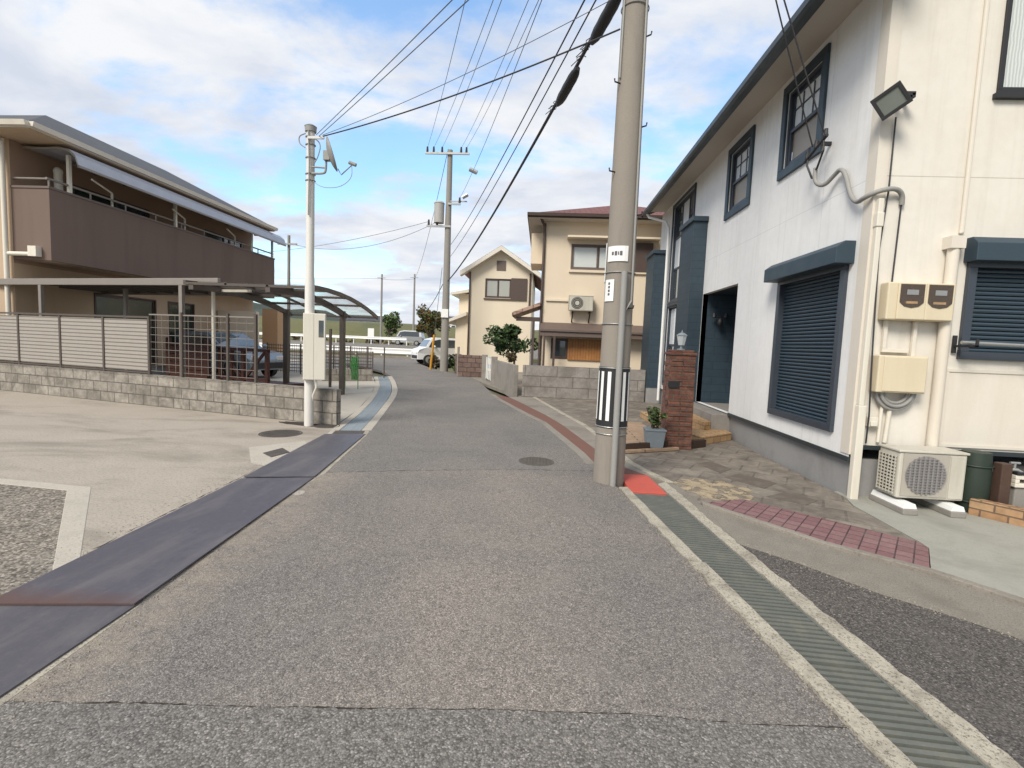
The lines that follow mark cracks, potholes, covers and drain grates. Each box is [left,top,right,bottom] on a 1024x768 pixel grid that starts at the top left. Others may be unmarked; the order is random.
drain grate [667,526,766,581]
drain grate [721,577,870,671]
drain grate [634,493,707,529]
manhole cover [263,448,289,457]
manhole cover [519,457,554,466]
drain grate [811,664,990,768]
